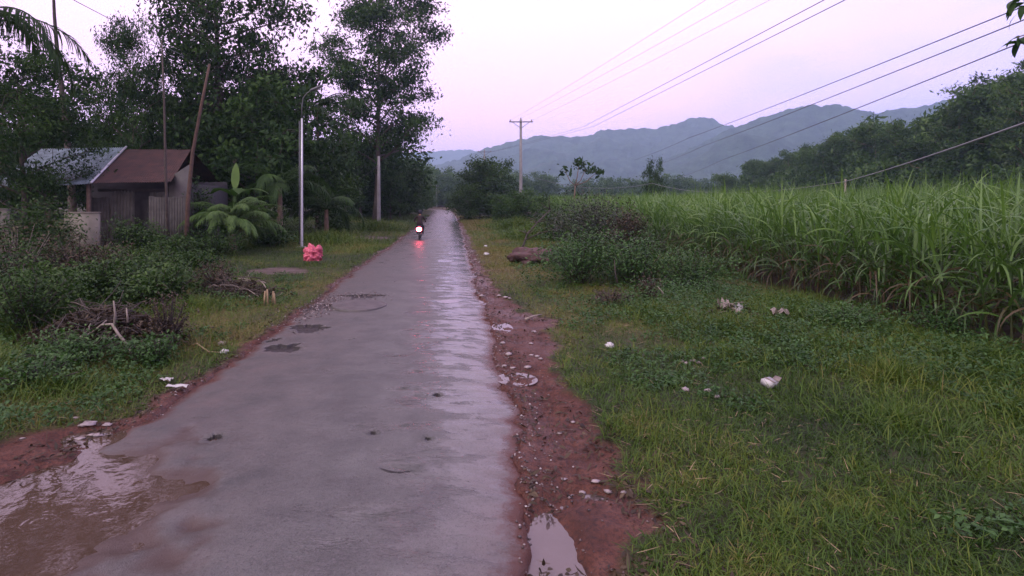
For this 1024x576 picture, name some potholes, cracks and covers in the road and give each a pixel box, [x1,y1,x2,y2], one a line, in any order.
pothole [198,430,231,444]
pothole [426,391,447,399]
pothole [284,323,333,334]
manhole cover [331,299,387,312]
pothole [257,342,308,354]
